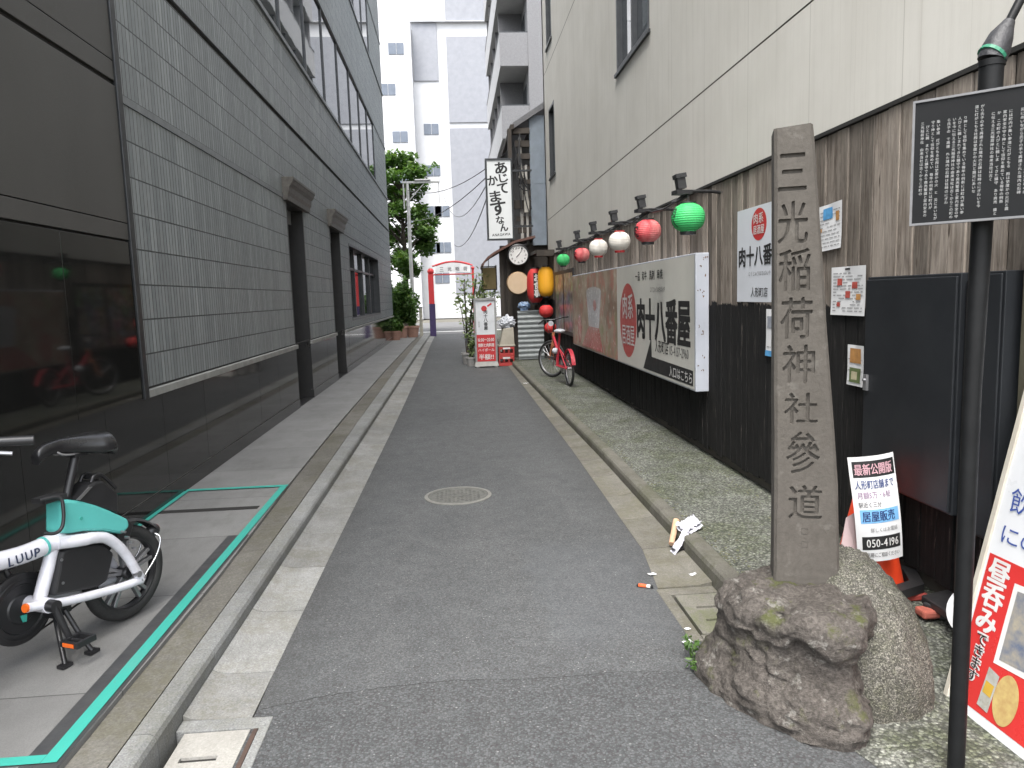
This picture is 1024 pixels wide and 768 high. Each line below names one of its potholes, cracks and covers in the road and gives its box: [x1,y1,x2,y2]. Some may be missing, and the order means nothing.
manhole cover [425,486,492,505]
